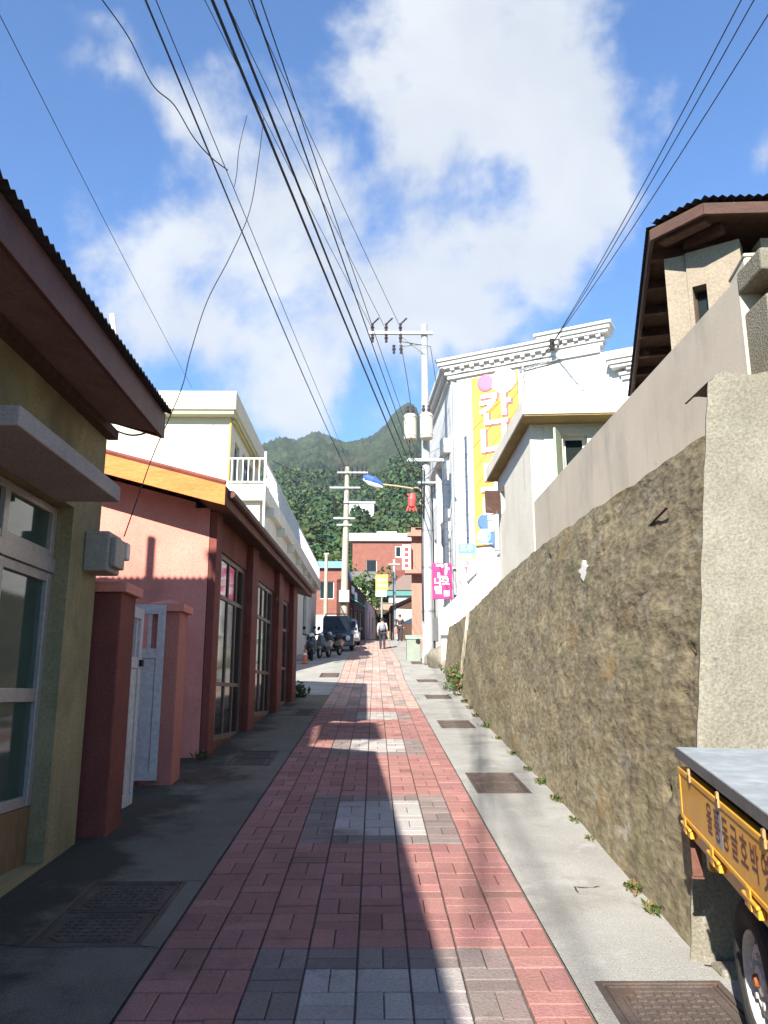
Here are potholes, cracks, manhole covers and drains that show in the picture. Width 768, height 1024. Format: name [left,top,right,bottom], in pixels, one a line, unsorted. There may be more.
manhole cover [437,720,476,728]
manhole cover [465,773,532,793]
manhole cover [224,751,280,766]
manhole cover [21,881,187,948]
manhole cover [594,980,747,1024]
